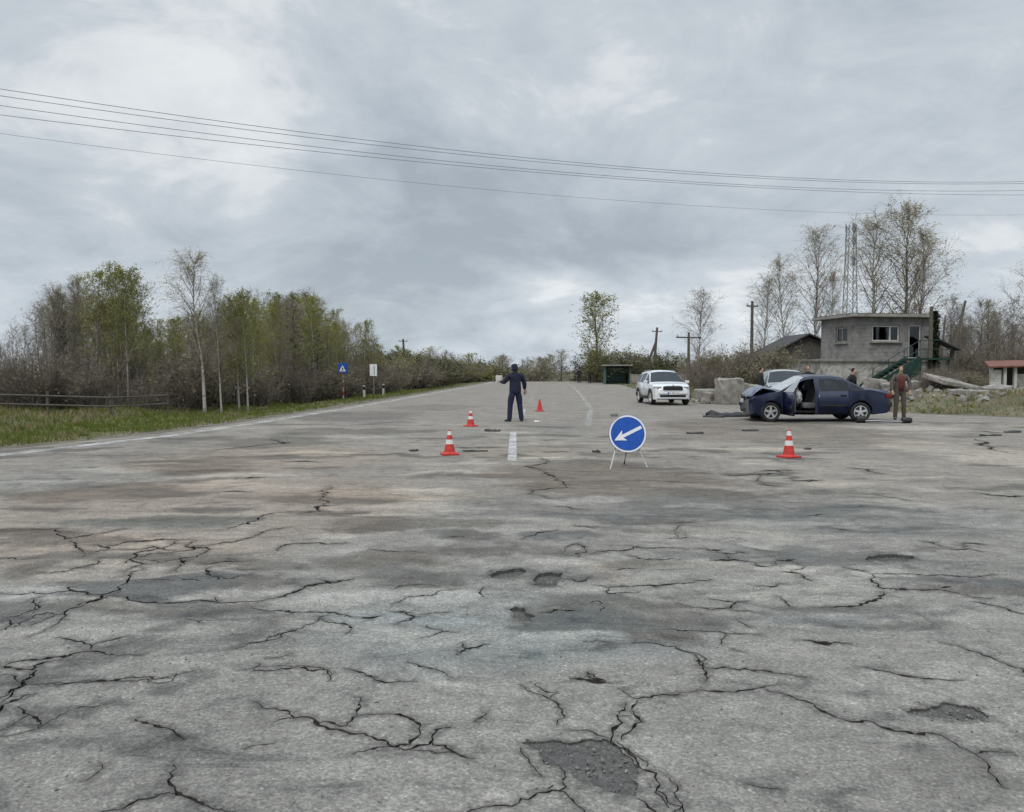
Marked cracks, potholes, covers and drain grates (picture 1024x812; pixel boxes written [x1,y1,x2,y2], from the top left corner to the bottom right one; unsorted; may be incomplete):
crack [524,451,588,527]
pothole [510,607,535,621]
crack [975,431,1007,453]
pothole [522,738,640,796]
crack [821,567,1023,614]
crack [0,512,486,759]
crack [102,764,229,812]
crack [520,599,1013,812]
pothole [905,702,989,722]
crack [724,470,822,486]
crack [526,522,813,613]
pothole [490,568,526,579]
